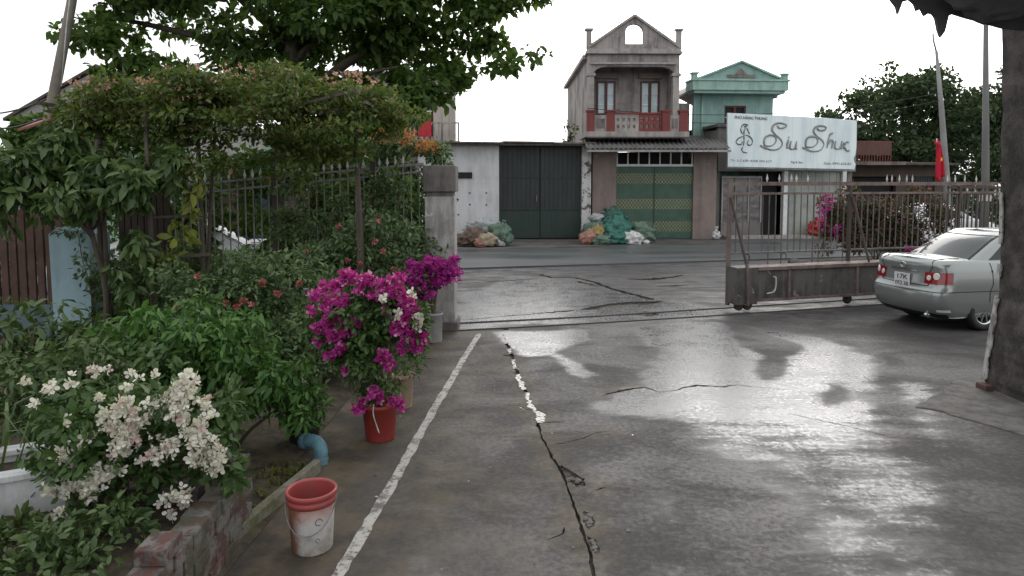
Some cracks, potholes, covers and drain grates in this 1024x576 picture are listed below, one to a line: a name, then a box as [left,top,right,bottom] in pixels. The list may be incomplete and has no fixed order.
crack [469,274,684,320]
crack [502,335,609,576]
crack [605,385,787,395]
